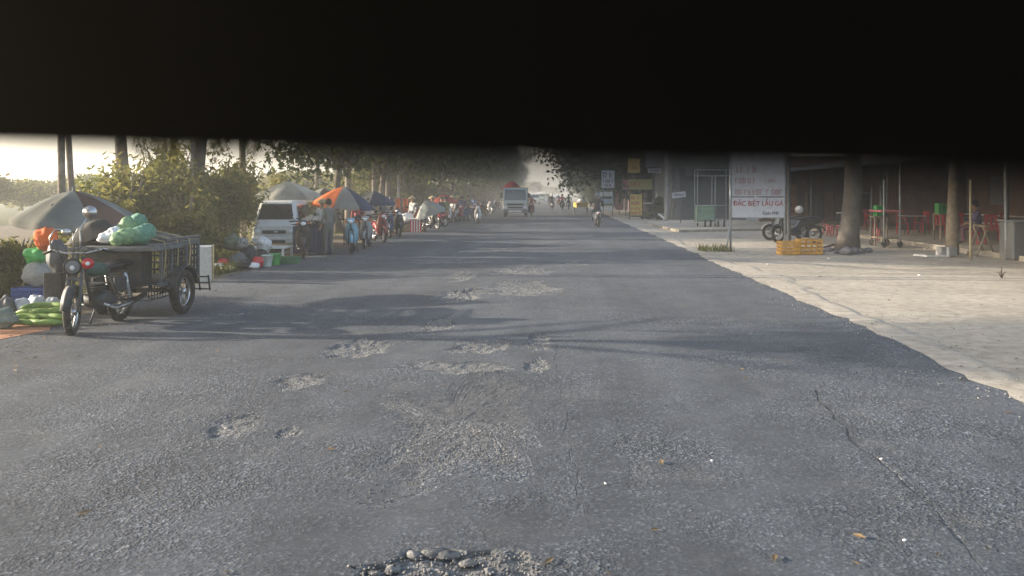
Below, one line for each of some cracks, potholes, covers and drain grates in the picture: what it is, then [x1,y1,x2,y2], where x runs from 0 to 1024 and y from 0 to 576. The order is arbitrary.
pothole [440,339,515,354]
pothole [347,546,543,576]
pothole [198,412,265,441]
pothole [272,425,305,439]
pothole [419,315,457,333]
pothole [396,360,519,375]
pothole [521,357,553,374]
pothole [476,280,564,297]
crack [757,349,988,576]
pothole [268,371,333,392]
pothole [317,338,399,360]
pothole [429,287,489,304]
